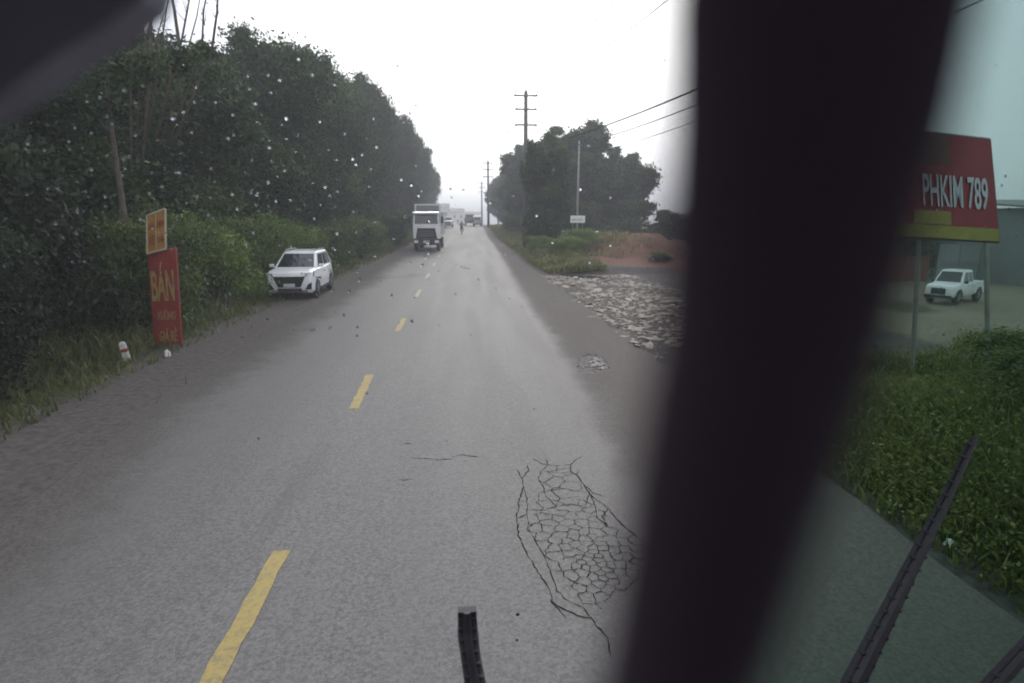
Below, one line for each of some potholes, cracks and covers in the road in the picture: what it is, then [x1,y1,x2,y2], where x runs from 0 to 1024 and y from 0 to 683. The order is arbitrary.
crack [516,457,623,635]
pothole [576,354,610,374]
